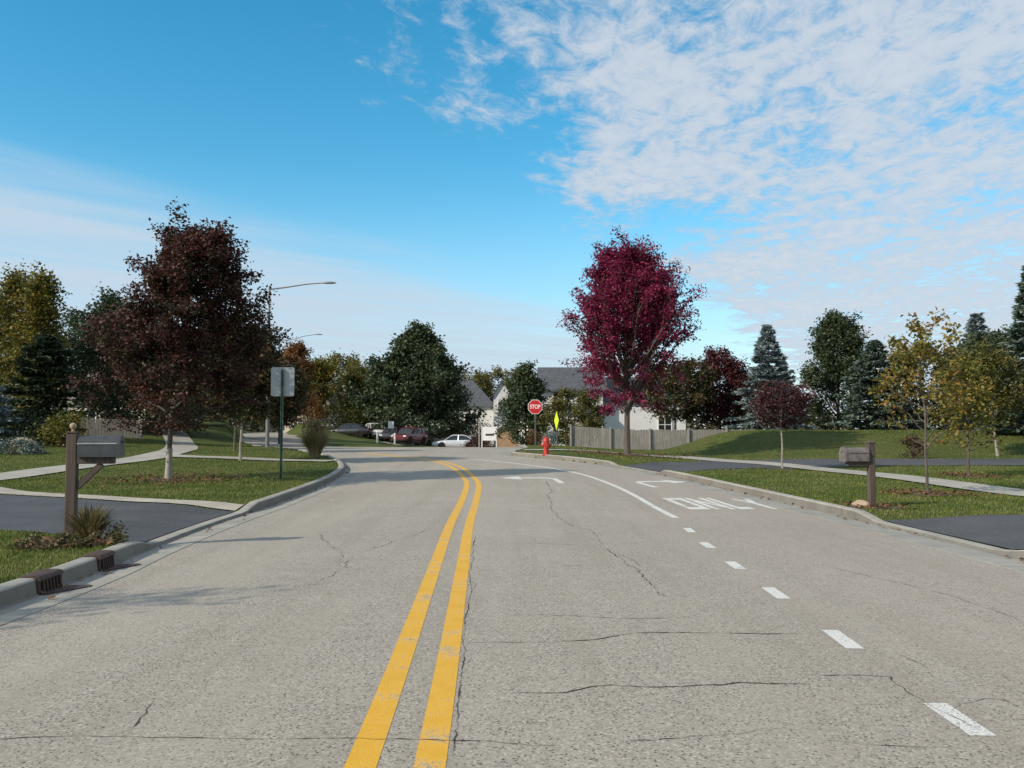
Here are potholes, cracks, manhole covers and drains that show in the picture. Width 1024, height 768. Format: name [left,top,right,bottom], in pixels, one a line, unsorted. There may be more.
crack [546,481,664,596]
crack [504,656,1009,734]
crack [527,614,790,643]
drain grate [17,569,92,595]
drain grate [80,550,141,572]
crack [3,704,560,746]
